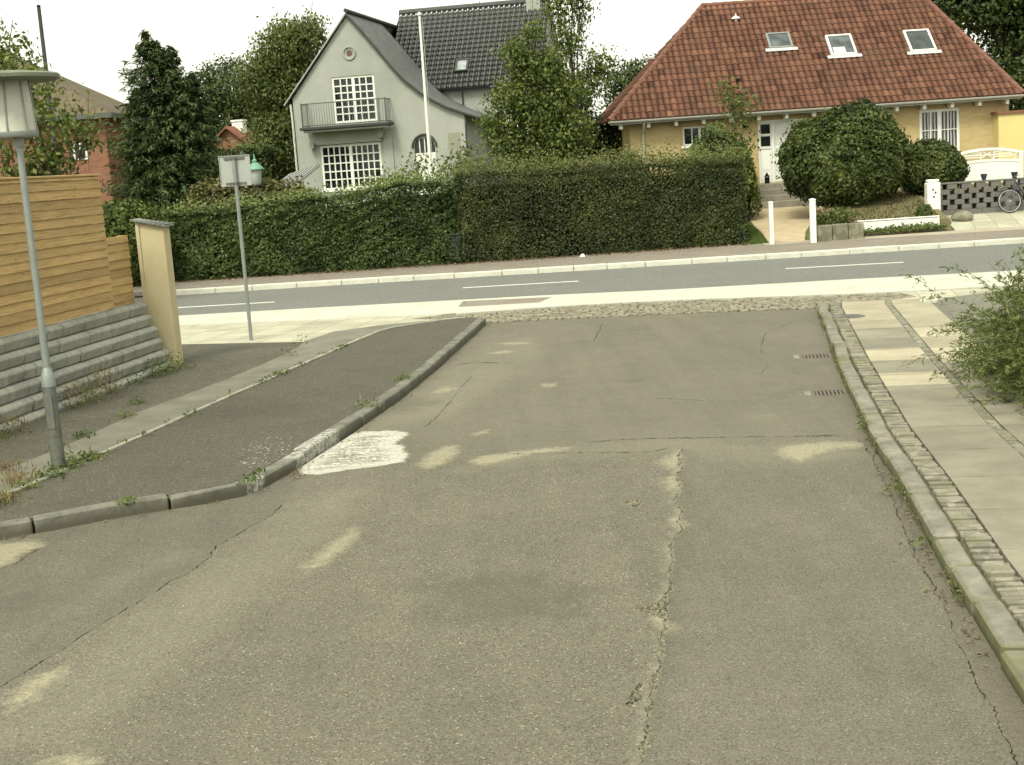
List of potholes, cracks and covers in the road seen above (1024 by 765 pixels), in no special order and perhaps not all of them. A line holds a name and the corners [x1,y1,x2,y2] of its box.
crack [425,362,496,427]
crack [0,504,282,687]
crack [854,437,1018,765]
crack [517,448,686,765]
